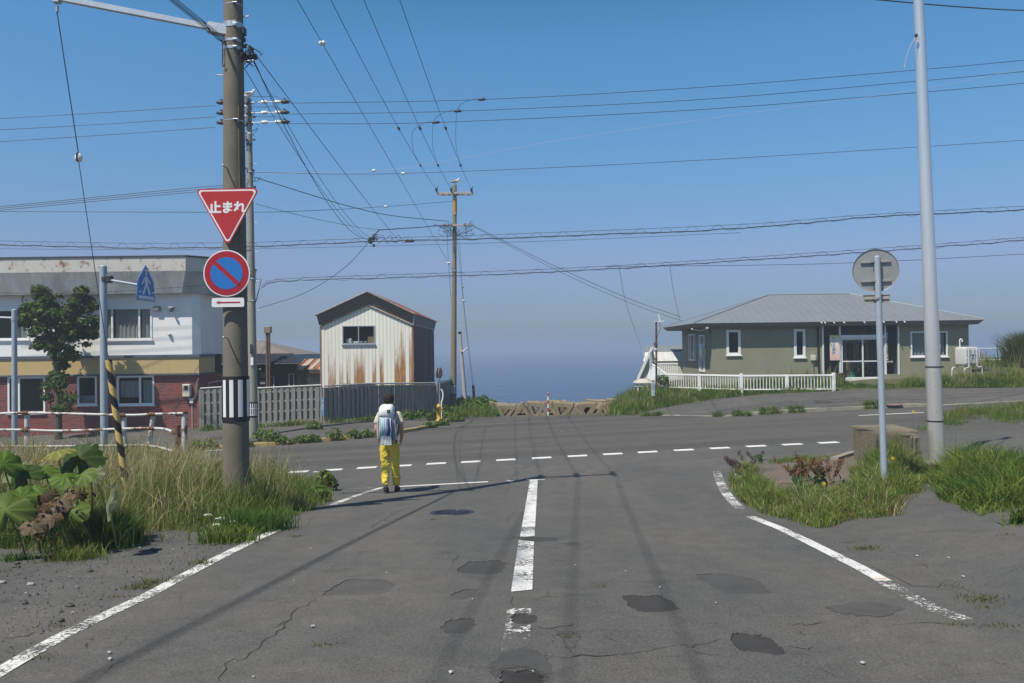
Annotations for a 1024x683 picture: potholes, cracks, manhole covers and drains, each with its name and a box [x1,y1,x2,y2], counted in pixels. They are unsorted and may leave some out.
crack [539,624,726,658]
crack [213,598,376,683]
